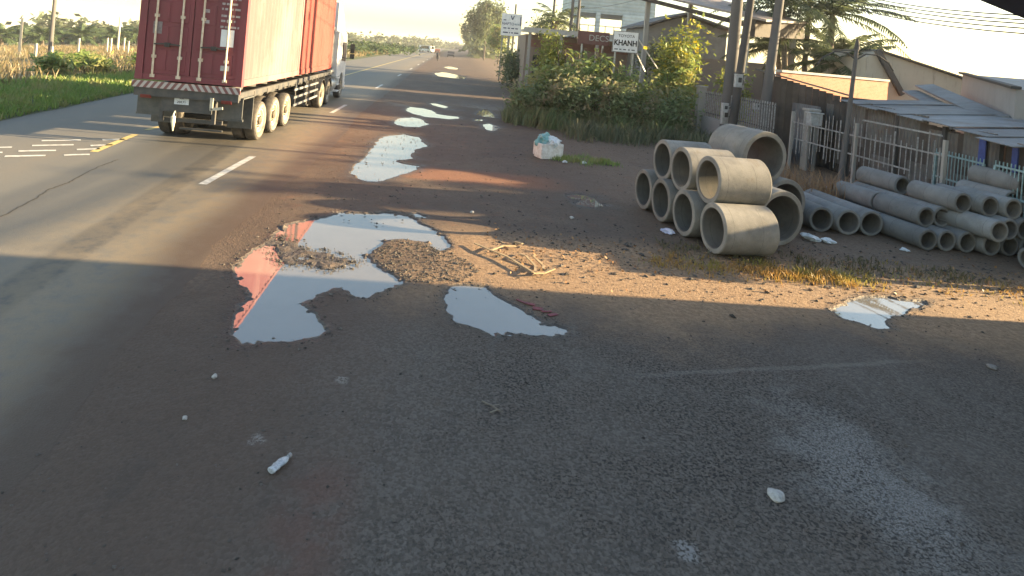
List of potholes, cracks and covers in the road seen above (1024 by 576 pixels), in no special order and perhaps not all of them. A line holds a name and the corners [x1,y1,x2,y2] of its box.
pothole [228,211,453,345]
pothole [349,134,428,182]
pothole [404,106,460,119]
pothole [442,283,577,338]
pothole [829,295,929,329]
pothole [564,193,604,208]
pothole [394,117,429,127]
crack [0,160,115,217]
